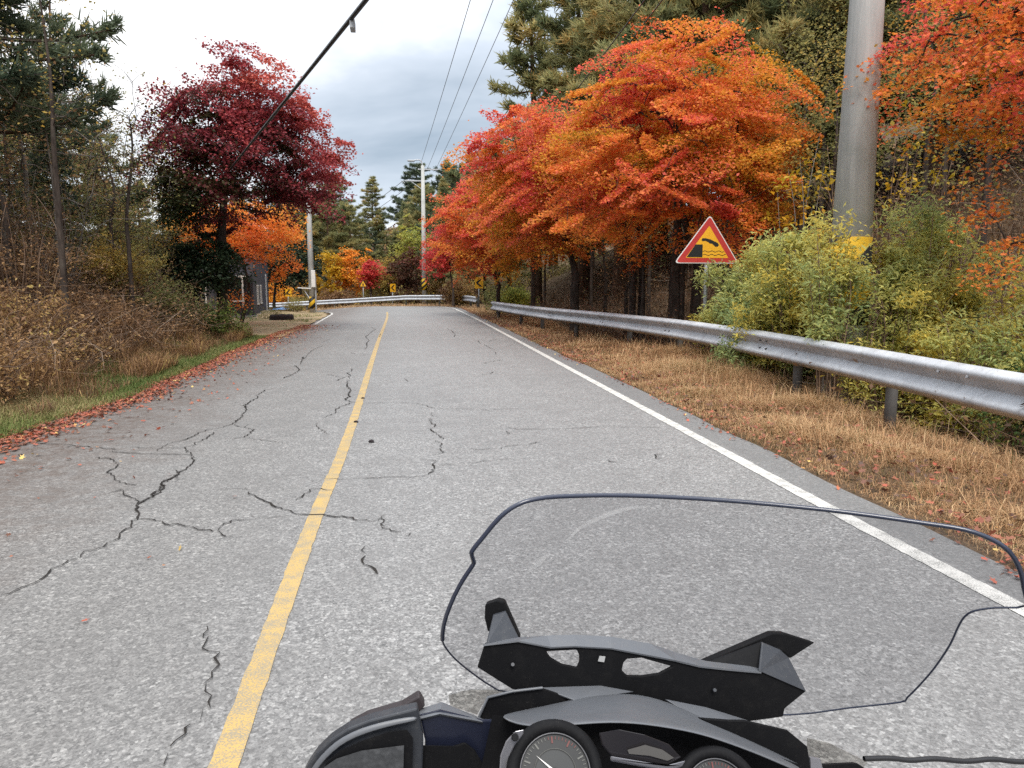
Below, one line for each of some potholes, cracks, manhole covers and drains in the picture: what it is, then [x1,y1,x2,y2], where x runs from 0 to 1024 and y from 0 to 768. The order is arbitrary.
crack [224,402,599,535]
crack [315,329,381,432]
crack [1,389,291,595]
crack [164,626,220,764]
